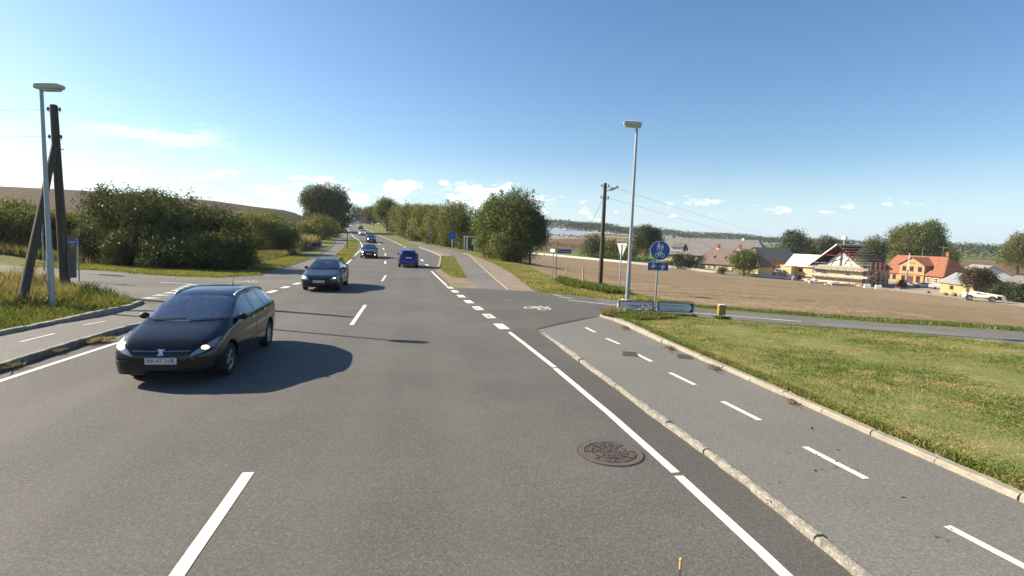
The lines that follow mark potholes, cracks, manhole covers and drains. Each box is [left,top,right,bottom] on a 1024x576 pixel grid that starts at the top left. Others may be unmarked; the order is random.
manhole cover [577,440,645,467]
